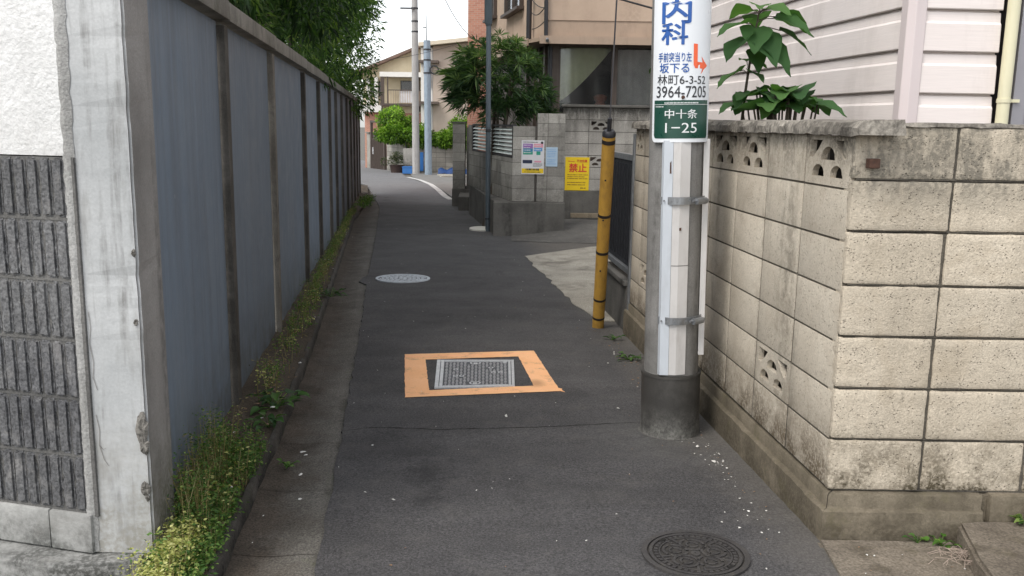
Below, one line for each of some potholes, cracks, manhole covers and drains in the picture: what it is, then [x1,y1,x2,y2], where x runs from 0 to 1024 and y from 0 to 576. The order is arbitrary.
manhole cover [375,274,430,283]
manhole cover [434,360,515,389]
manhole cover [642,530,751,576]
